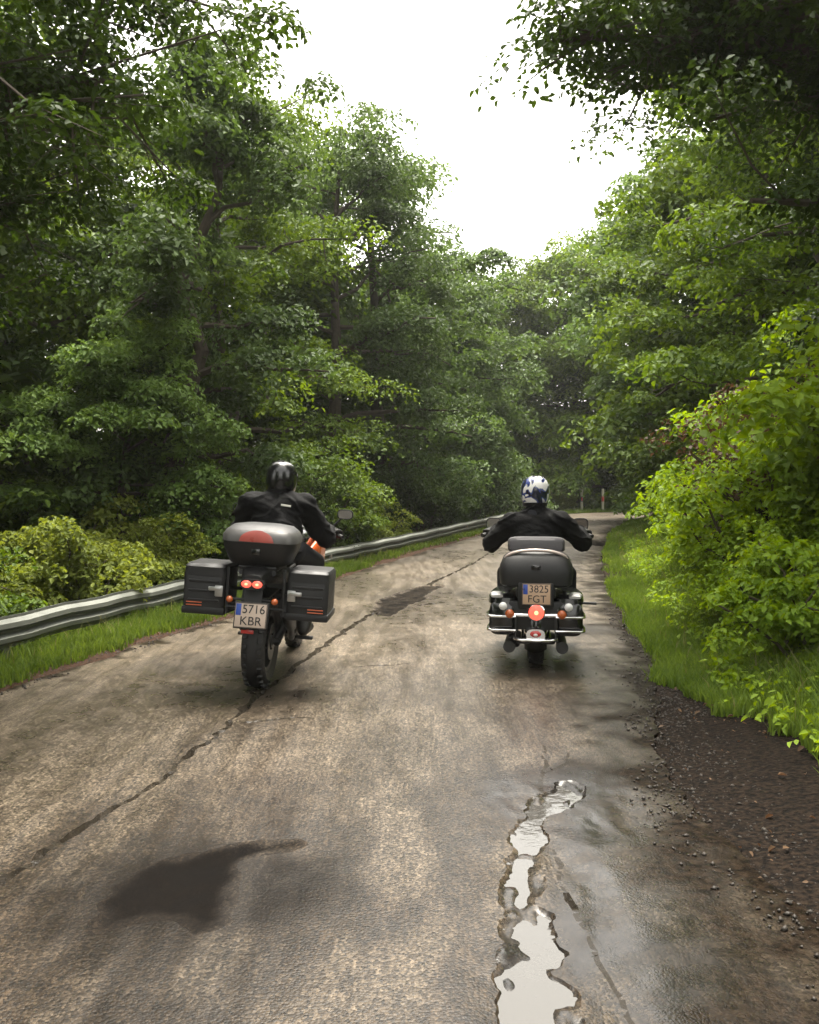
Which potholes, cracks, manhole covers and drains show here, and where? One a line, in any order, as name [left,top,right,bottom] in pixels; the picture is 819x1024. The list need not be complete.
crack [0,552,490,885]
pothole [491,780,586,1024]
crack [538,745,570,794]
crack [552,850,635,1024]
